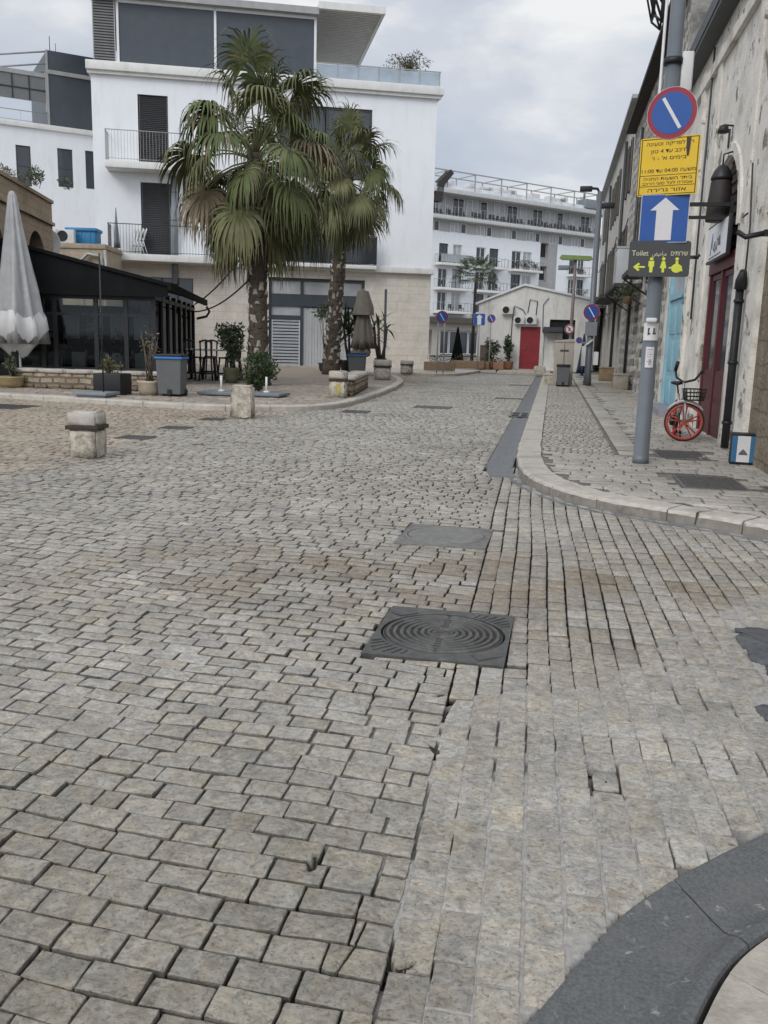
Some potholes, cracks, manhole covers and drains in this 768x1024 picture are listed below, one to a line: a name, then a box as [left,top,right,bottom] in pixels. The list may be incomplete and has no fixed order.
utility cover [651,450,712,461]
manhole cover [394,524,494,551]
utility cover [672,474,751,491]
manhole cover [361,606,514,673]
